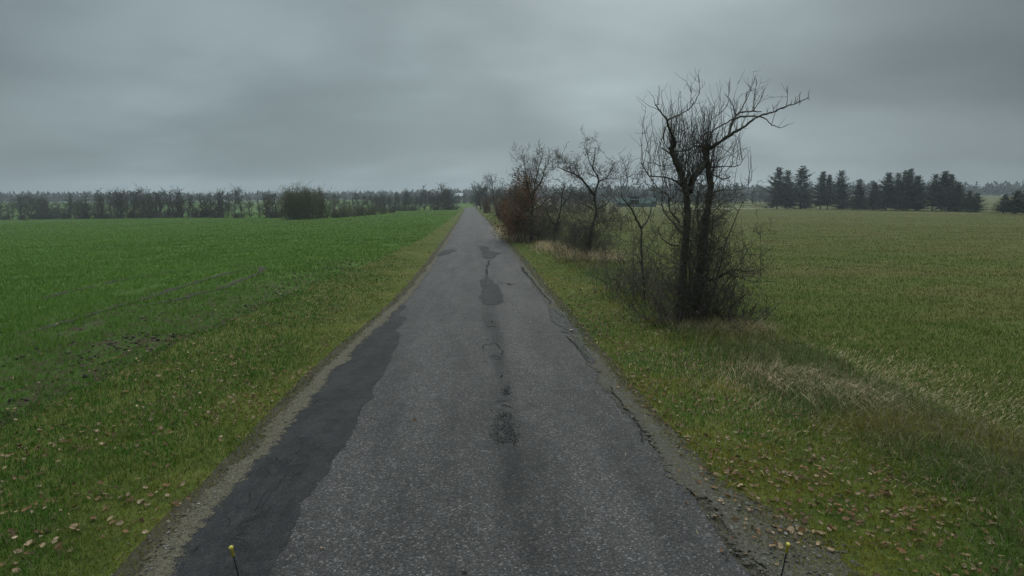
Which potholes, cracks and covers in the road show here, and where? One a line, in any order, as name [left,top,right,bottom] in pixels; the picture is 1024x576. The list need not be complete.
pothole [489,412,520,444]
crack [610,386,643,441]
crack [507,267,552,304]
